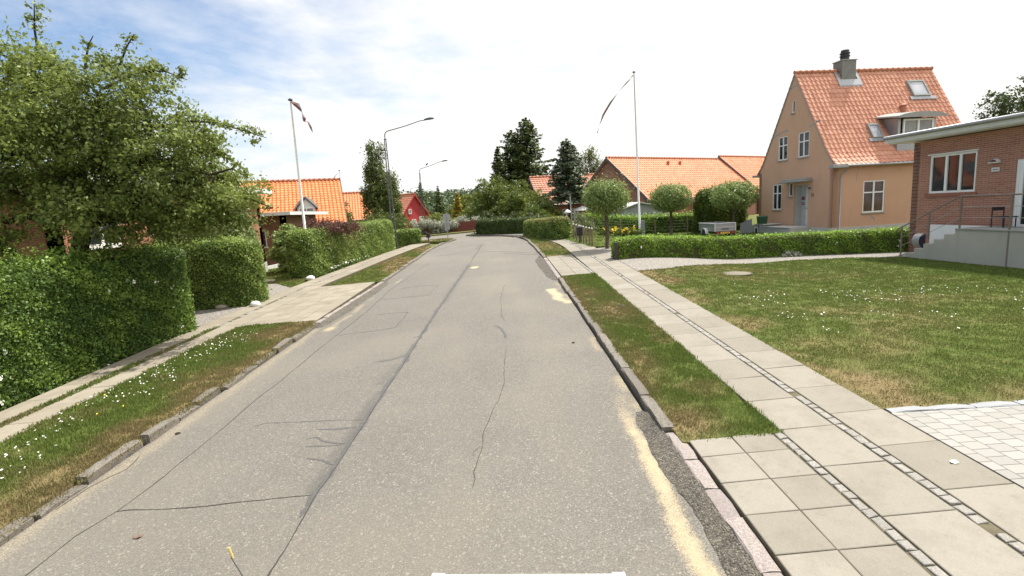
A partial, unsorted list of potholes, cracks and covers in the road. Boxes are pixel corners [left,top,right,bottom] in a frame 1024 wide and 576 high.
crack [25,265,437,576]
crack [472,351,506,488]
